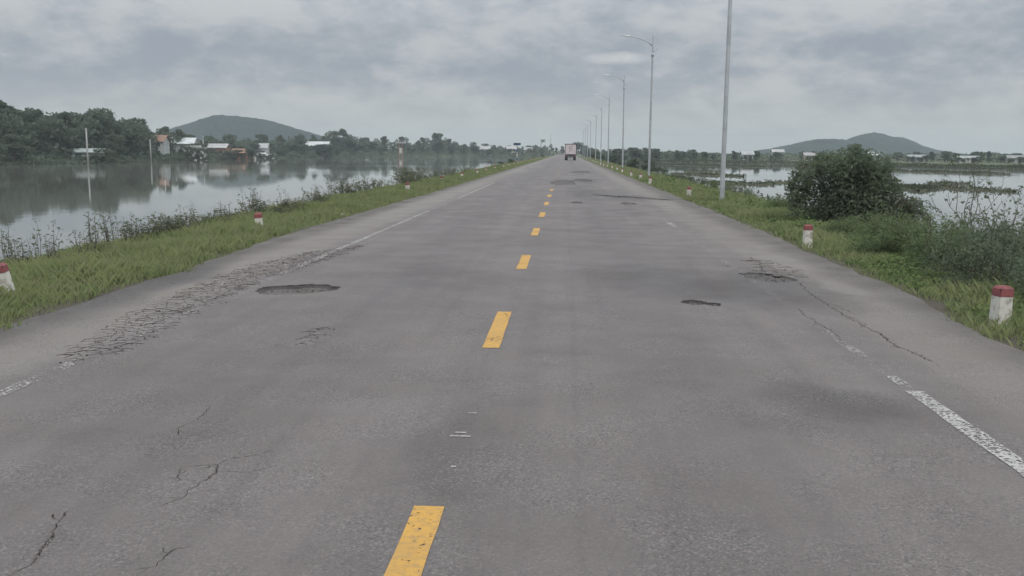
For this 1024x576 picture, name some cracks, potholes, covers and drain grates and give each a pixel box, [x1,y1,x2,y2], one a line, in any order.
crack [161,452,270,506]
pothole [254,284,340,295]
pothole [739,272,797,283]
crack [57,244,366,364]
crack [722,257,933,362]
crack [133,546,190,573]
crack [8,511,67,576]
